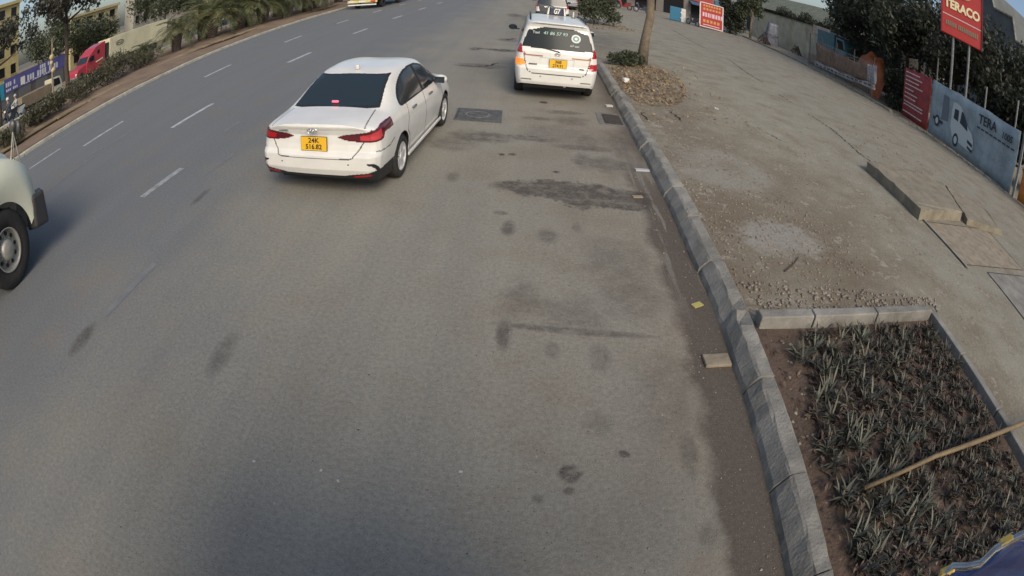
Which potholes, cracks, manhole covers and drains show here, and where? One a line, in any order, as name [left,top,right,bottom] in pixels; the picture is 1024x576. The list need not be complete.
drain grate [595,112,626,127]
manhole cover [453,108,503,123]
